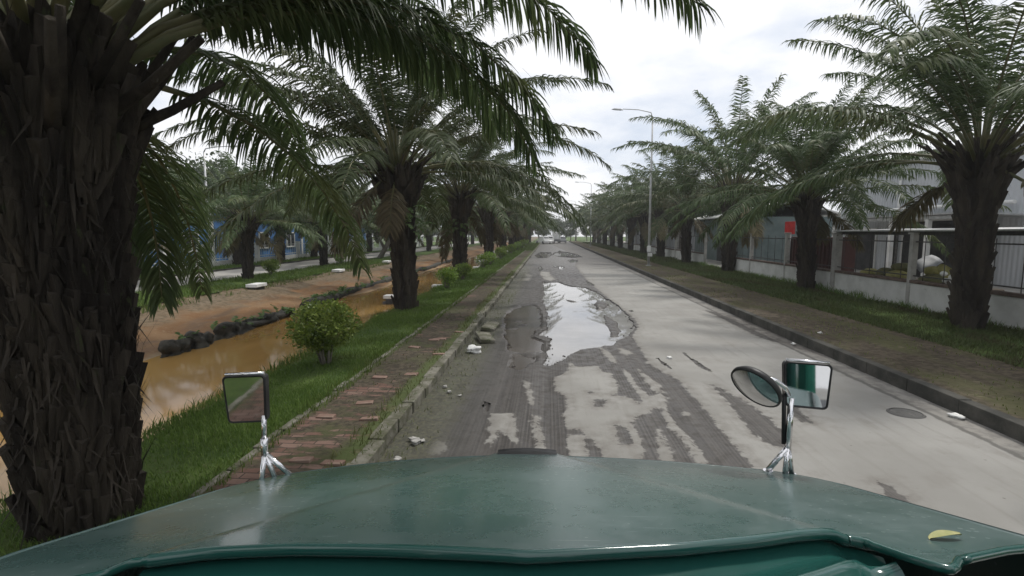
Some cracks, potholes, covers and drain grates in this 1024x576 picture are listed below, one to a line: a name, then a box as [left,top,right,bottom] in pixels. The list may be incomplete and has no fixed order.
manhole cover [886,407,927,419]
pothole [538,282,637,366]
crack [658,353,711,371]
pothole [501,303,548,370]
